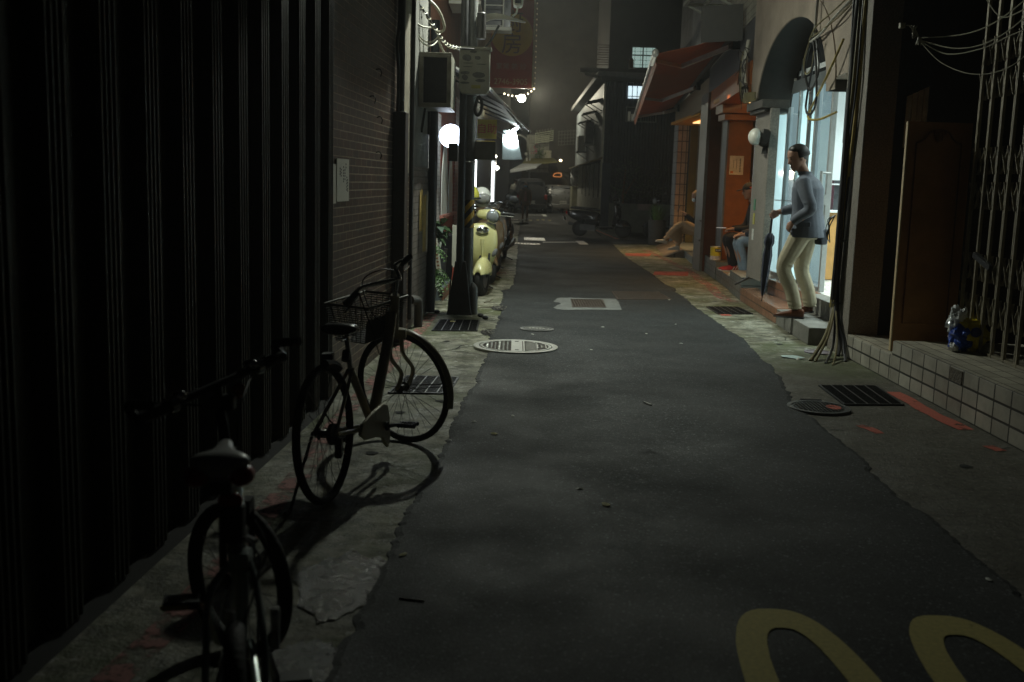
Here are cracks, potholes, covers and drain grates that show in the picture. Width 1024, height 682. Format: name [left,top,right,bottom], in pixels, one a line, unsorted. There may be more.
drain grate [388,375,459,395]
drain grate [818,385,904,406]
manhole cover [787,399,851,416]
manhole cover [553,298,622,310]
drain grate [431,319,480,332]
drain grate [706,306,753,315]
manhole cover [473,339,558,354]
